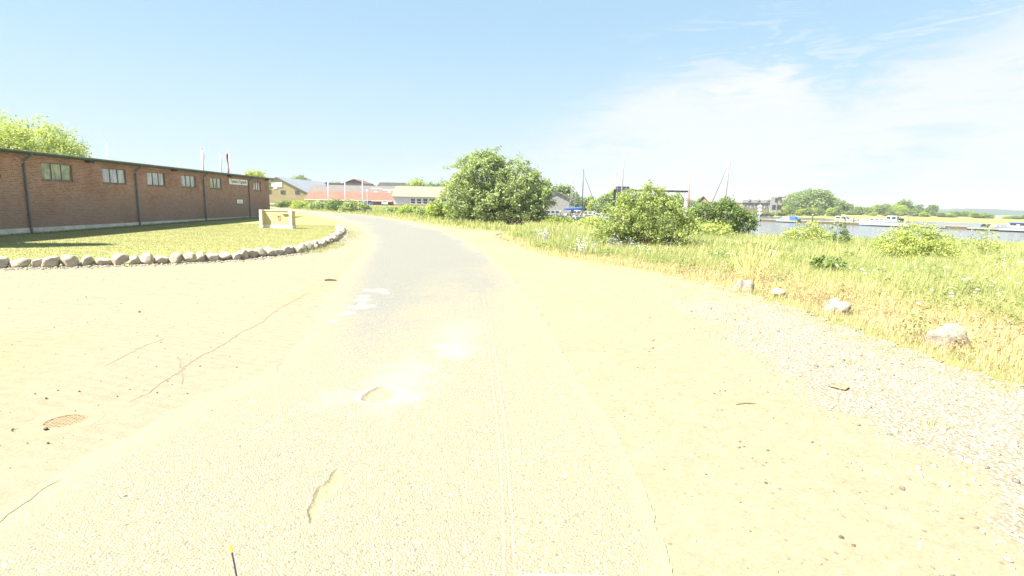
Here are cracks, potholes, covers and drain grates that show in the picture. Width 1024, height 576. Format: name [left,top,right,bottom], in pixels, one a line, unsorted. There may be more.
pothole [361,386,397,403]
crack [0,480,59,522]
crack [109,293,307,399]
